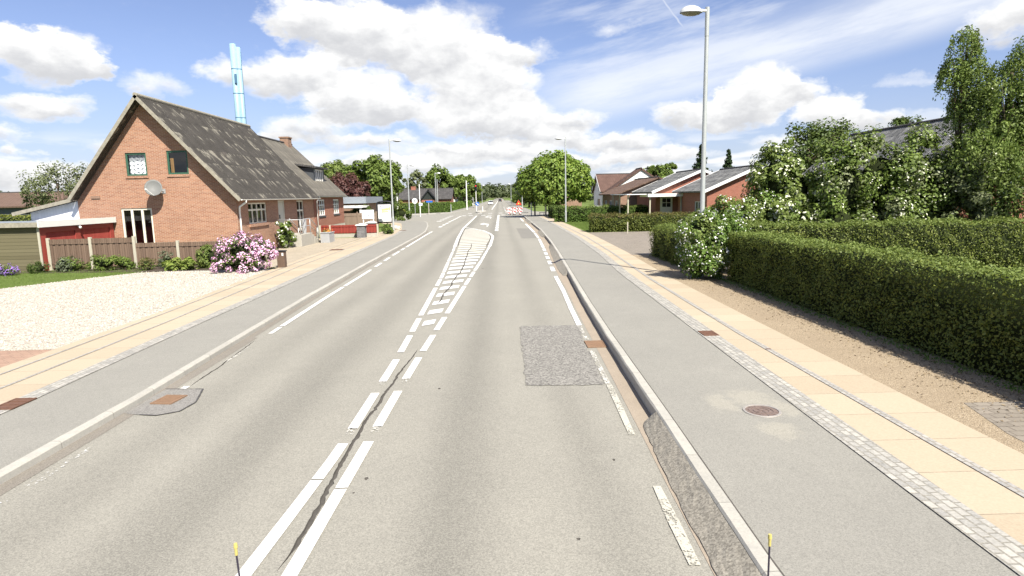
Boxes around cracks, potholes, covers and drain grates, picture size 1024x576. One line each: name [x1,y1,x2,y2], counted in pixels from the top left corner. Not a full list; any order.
manhole cover [742,404,782,417]
utility cover [0,397,37,410]
crack [191,341,254,386]
